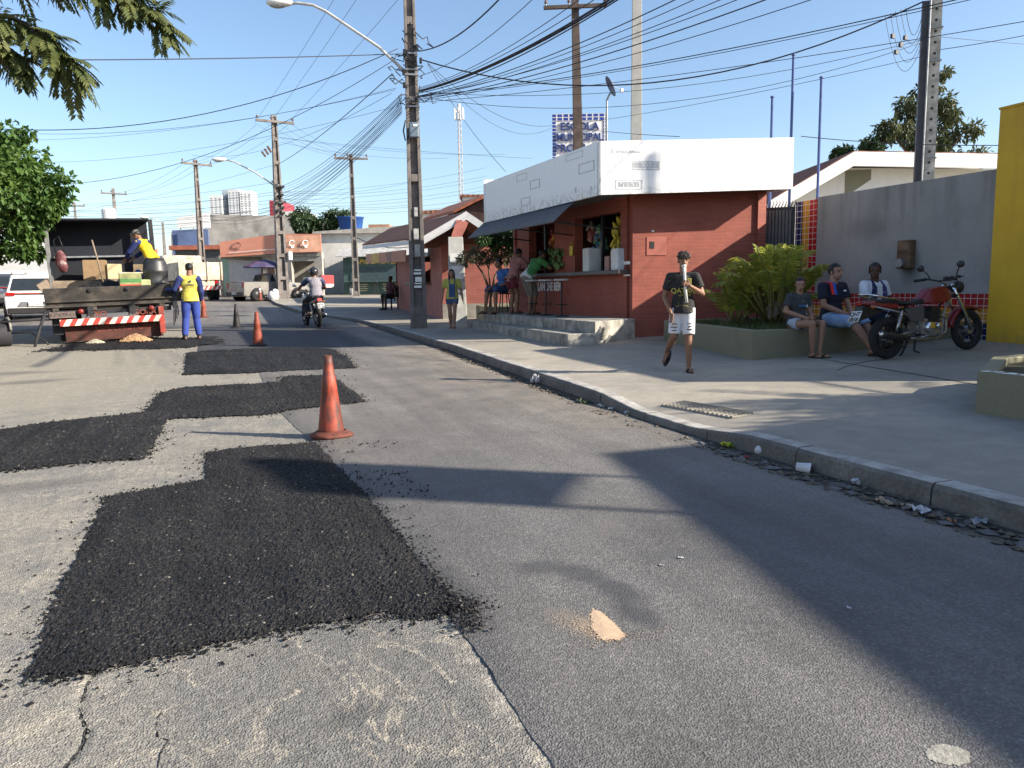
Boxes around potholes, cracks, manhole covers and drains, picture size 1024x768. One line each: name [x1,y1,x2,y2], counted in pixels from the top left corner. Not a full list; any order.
crack [156,711,169,768]
drain grate [662,400,754,419]
crack [64,670,97,768]
